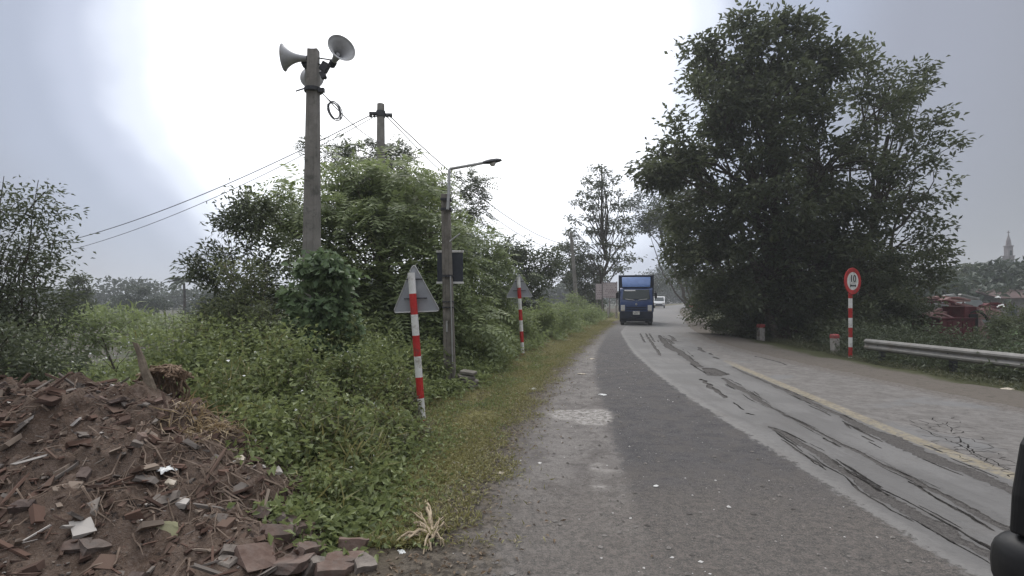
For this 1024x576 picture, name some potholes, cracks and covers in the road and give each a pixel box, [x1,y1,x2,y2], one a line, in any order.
crack [640,334,1015,564]
